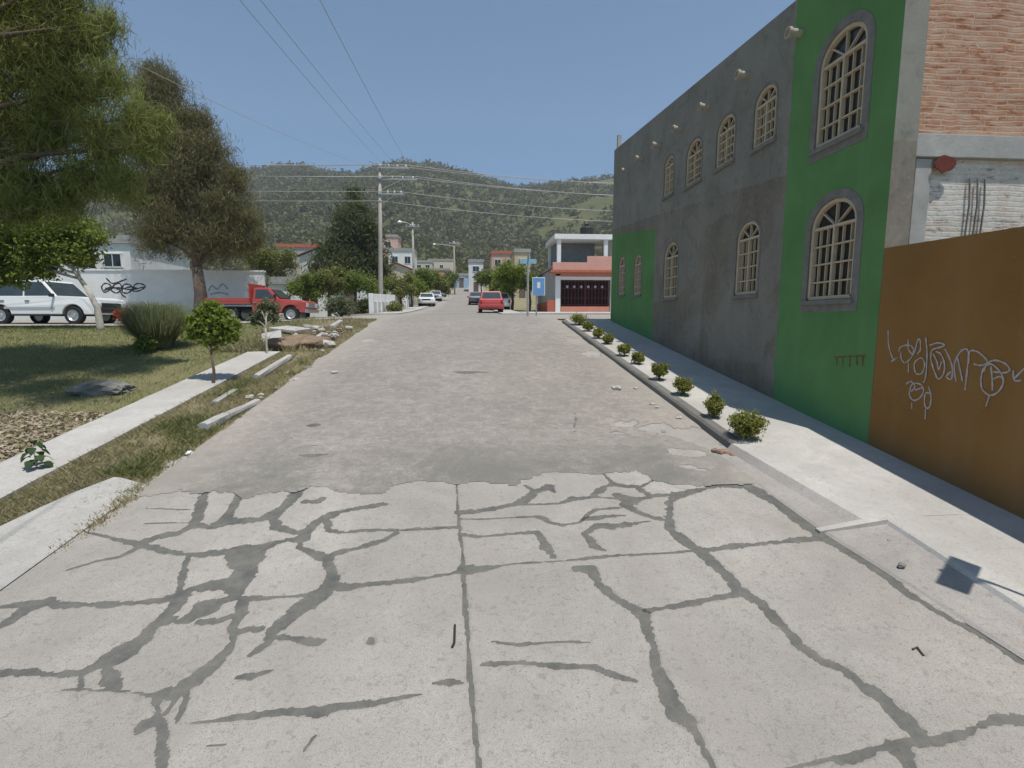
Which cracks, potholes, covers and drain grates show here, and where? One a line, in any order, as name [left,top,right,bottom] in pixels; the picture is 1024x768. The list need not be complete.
crack [0,454,1024,768]
